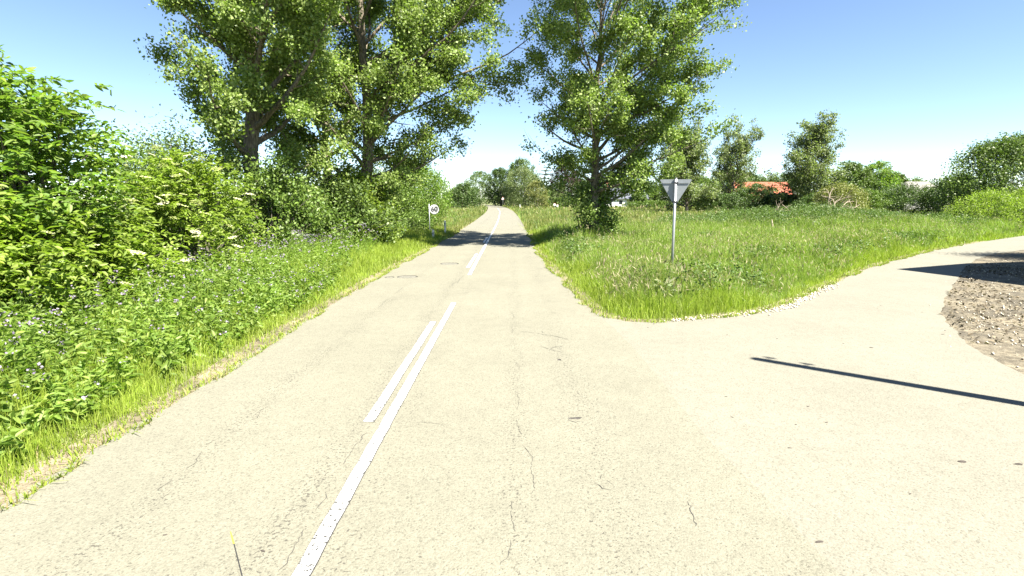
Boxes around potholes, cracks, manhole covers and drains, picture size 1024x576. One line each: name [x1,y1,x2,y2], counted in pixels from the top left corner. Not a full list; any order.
crack [500,313,561,564]
crack [279,432,367,570]
